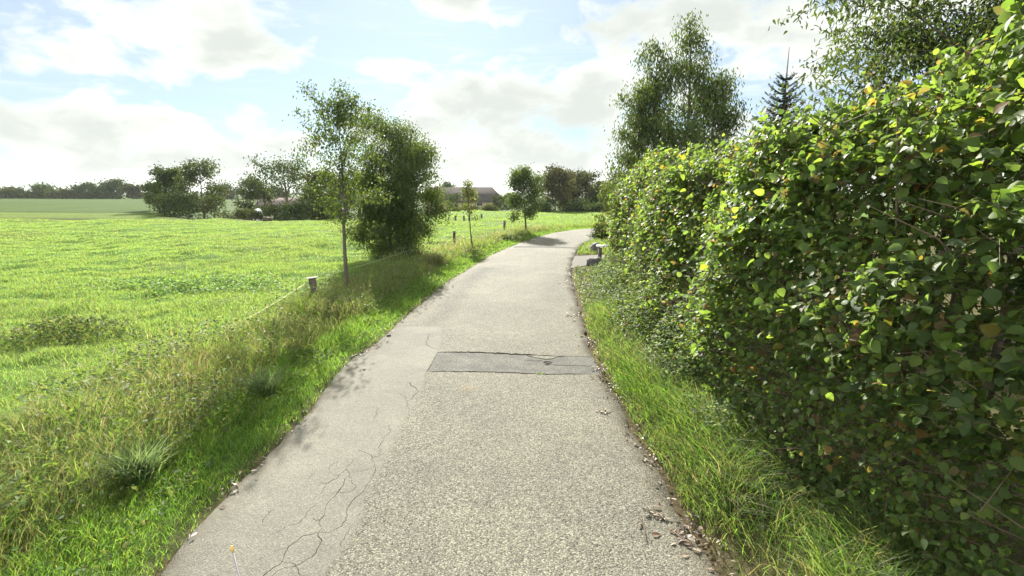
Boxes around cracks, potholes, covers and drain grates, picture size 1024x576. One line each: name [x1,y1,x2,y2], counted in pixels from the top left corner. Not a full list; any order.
crack [263,409,390,576]
